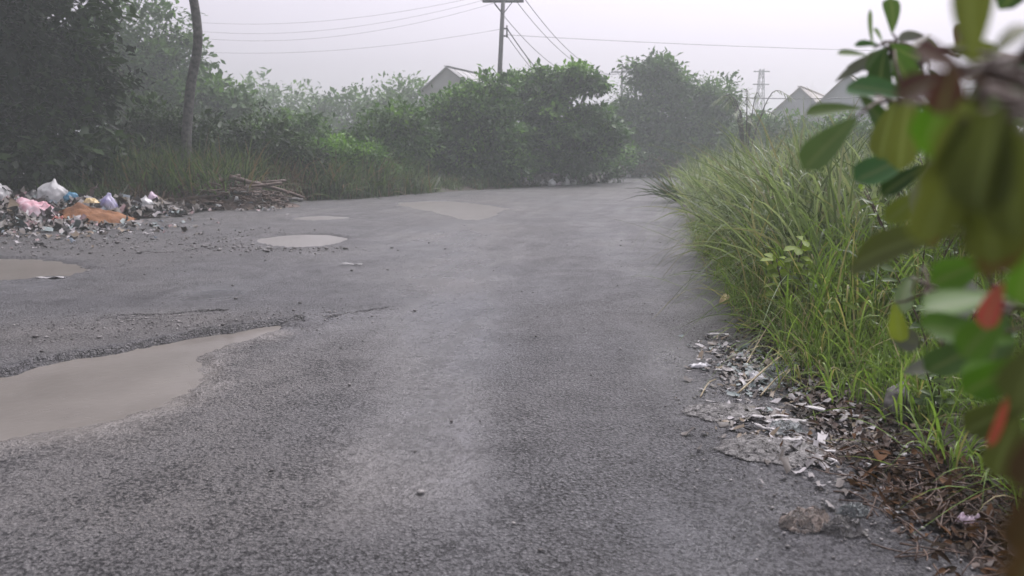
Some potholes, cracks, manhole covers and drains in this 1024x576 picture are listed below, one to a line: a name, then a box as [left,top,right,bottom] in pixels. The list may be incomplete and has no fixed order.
crack [279,305,399,327]
pothole [0,314,327,462]
crack [100,308,240,319]
pothole [0,254,120,284]
